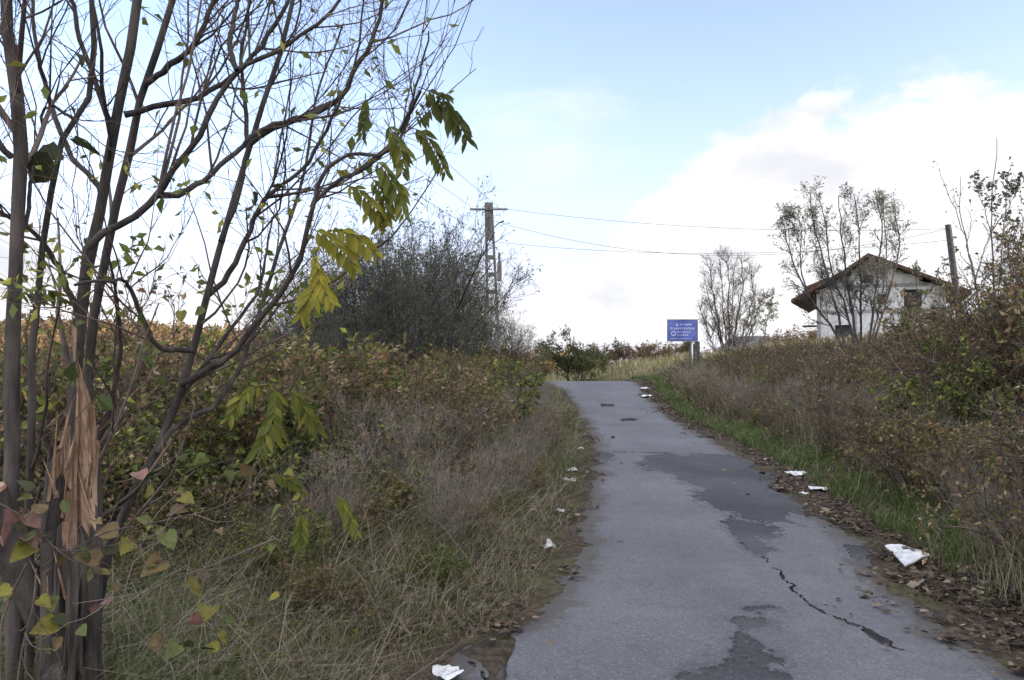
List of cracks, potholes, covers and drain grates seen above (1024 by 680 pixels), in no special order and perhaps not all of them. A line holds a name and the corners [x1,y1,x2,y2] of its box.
crack [740,542,905,651]
